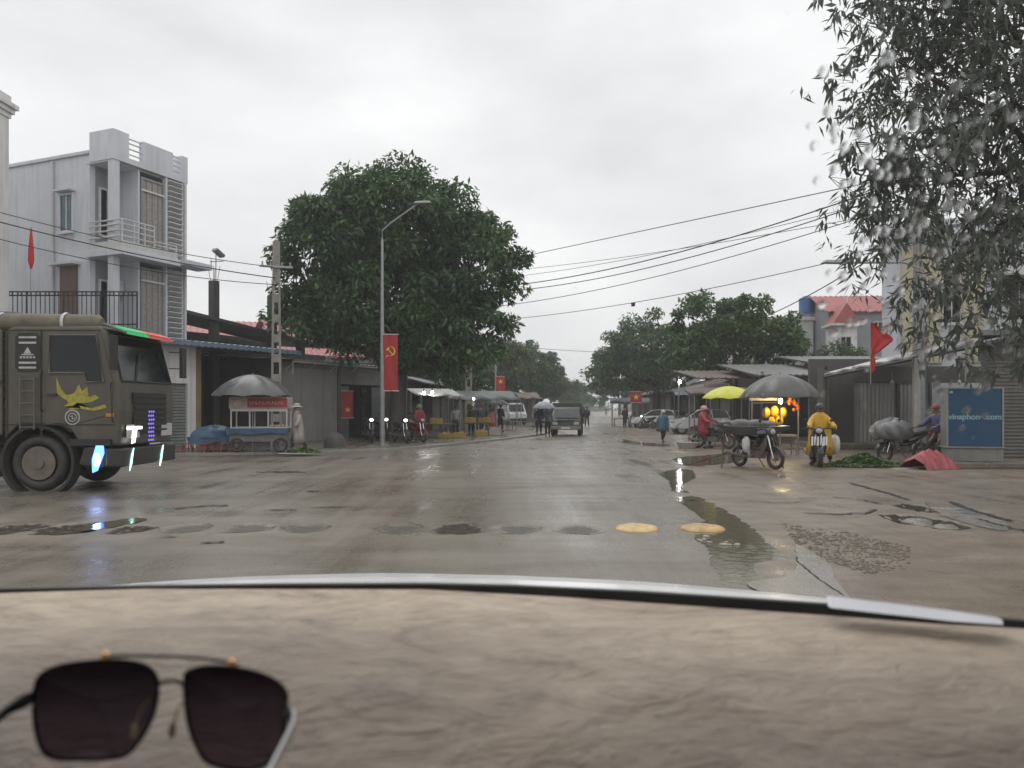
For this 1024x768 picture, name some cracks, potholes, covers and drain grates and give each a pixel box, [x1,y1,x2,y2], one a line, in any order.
pothole [432,522,484,534]
pothole [28,522,99,535]
pothole [372,523,424,534]
pothole [900,516,971,530]
crack [795,556,843,595]
pothole [0,523,51,535]
pothole [551,524,605,535]
pothole [105,525,159,534]
pothole [878,514,920,526]
pothole [494,525,542,534]
pothole [159,523,213,533]
